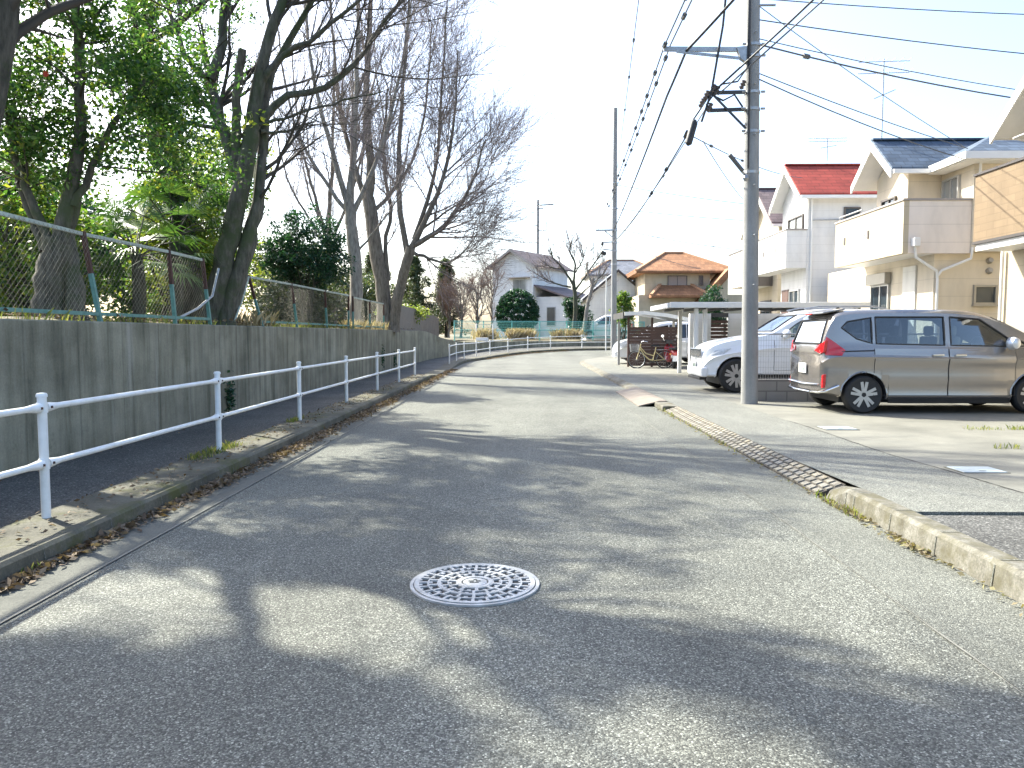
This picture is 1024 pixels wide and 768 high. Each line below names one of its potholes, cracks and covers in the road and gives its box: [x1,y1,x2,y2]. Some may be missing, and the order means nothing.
manhole cover [410,563,540,607]
